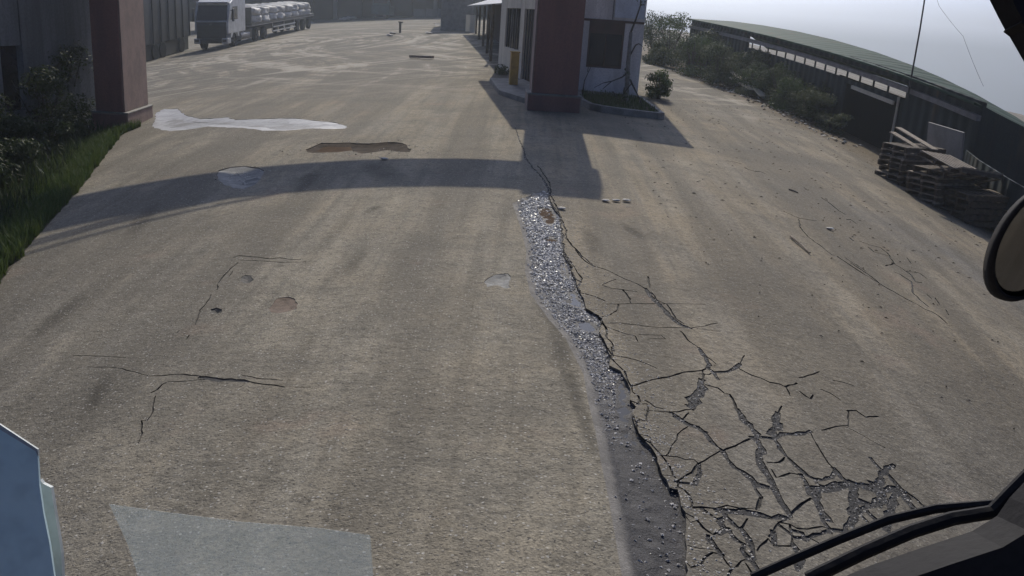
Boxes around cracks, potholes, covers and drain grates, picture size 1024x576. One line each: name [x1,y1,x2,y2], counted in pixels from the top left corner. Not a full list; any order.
crack [784,198,949,323]
crack [73,355,284,443]
crack [516,131,924,576]
crack [177,255,301,340]
pothole [269,297,298,313]
